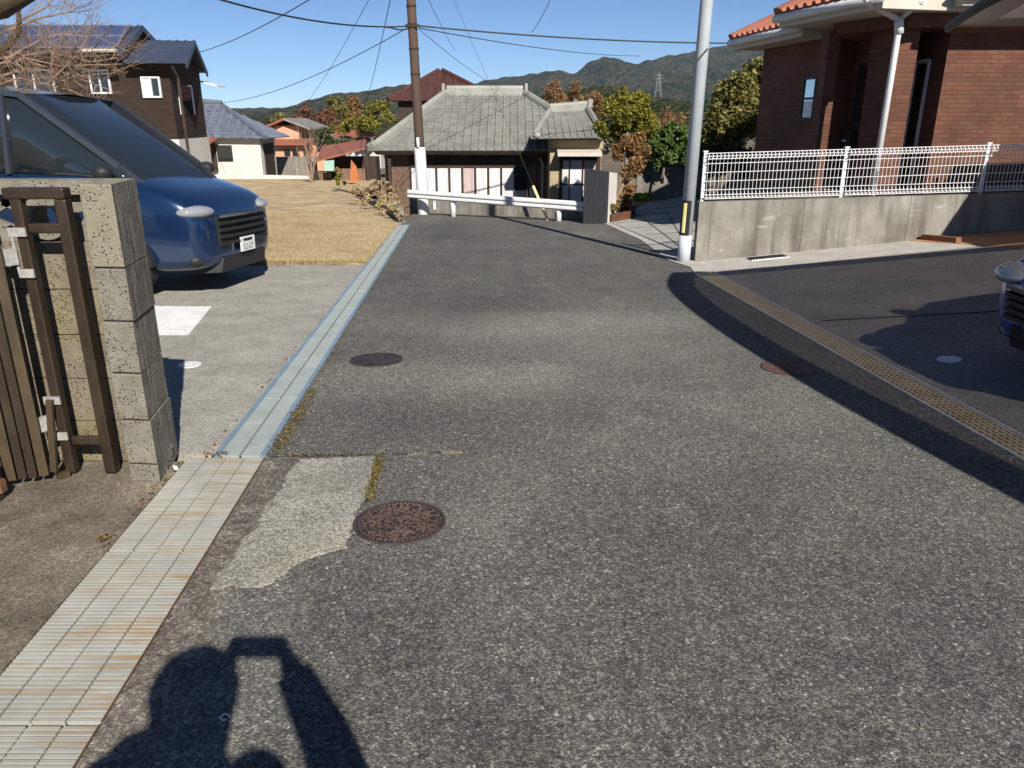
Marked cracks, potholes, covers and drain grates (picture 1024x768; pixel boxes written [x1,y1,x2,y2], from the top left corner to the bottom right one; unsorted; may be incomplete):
drain grate [743,300,806,322]
drain grate [715,285,768,302]
drain grate [778,320,855,348]
drain grate [745,253,790,261]
manhole cover [353,501,446,545]
drain grate [693,272,739,286]
manhole cover [761,360,817,376]
drain grate [885,381,1013,433]
manhole cover [349,352,403,367]
drain grate [824,346,920,383]
